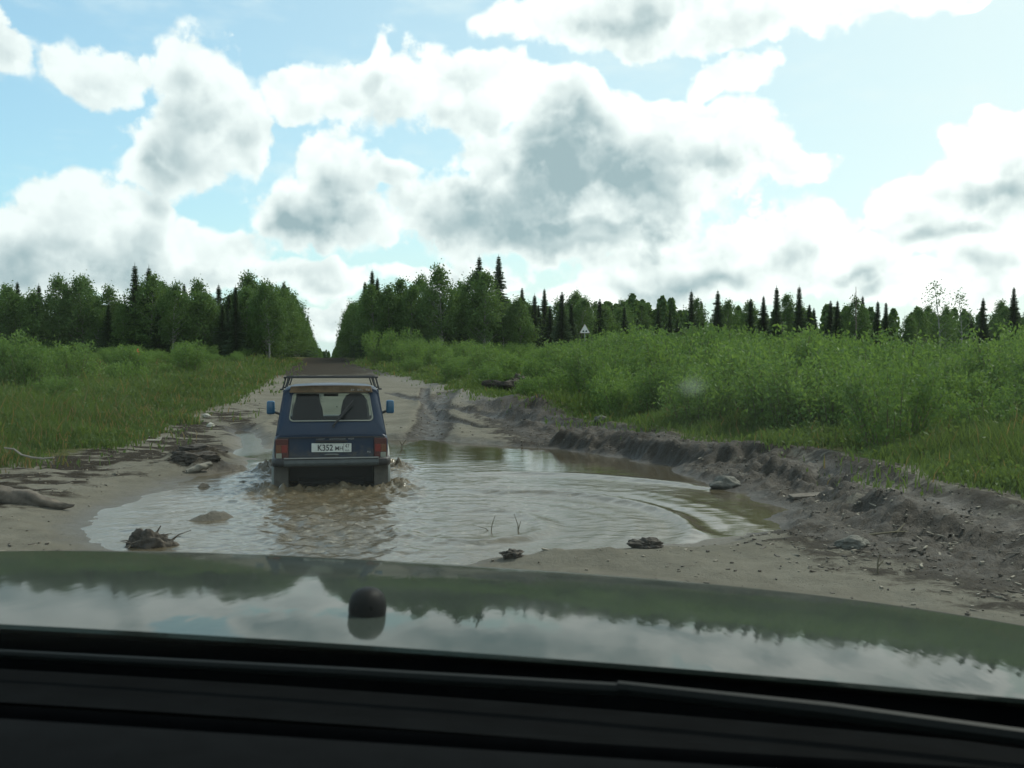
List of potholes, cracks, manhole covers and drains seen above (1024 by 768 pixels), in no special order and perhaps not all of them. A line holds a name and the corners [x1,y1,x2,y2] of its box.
pothole [71,445,800,566]
